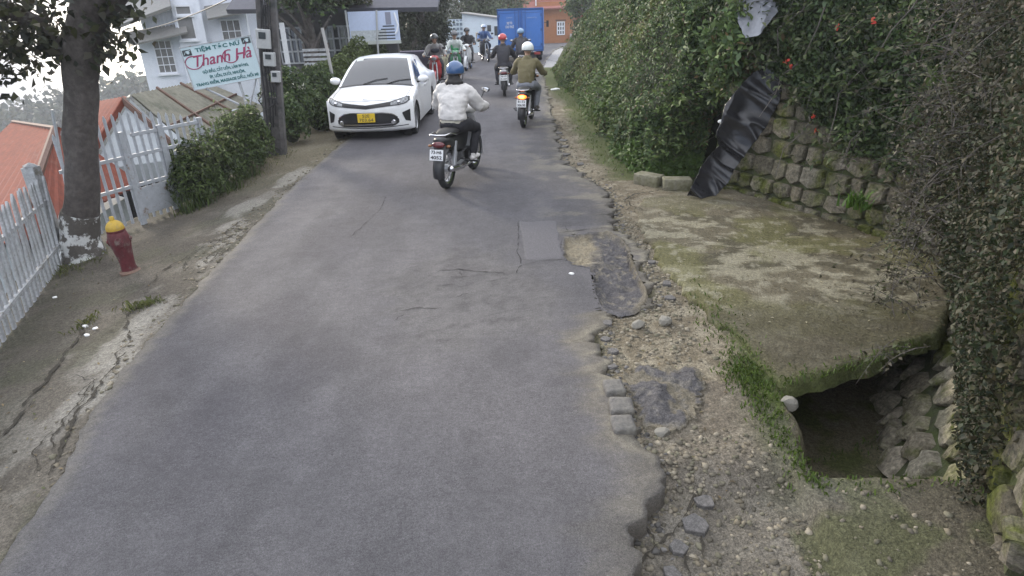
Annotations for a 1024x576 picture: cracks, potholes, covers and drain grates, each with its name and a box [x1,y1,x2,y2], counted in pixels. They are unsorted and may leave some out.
pothole [560,231,648,317]
crack [436,227,560,297]
crack [0,220,258,476]
